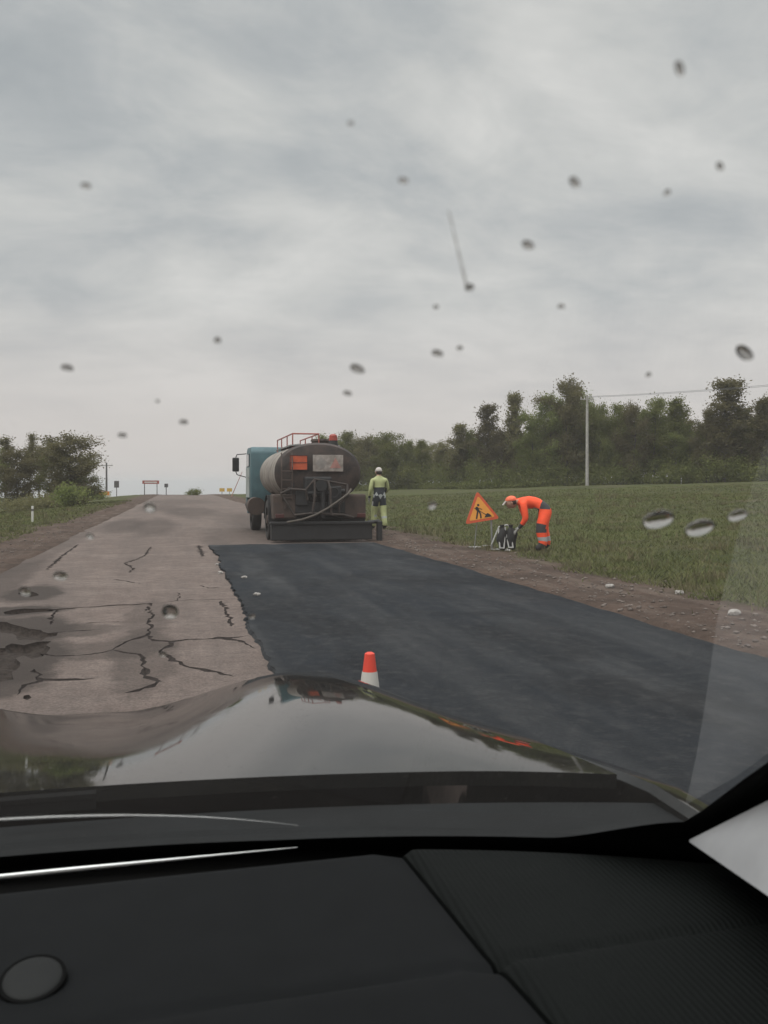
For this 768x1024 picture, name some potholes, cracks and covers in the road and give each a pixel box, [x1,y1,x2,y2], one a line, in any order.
pothole [0,622,57,641]
crack [113,547,152,584]
crack [17,585,256,695]
